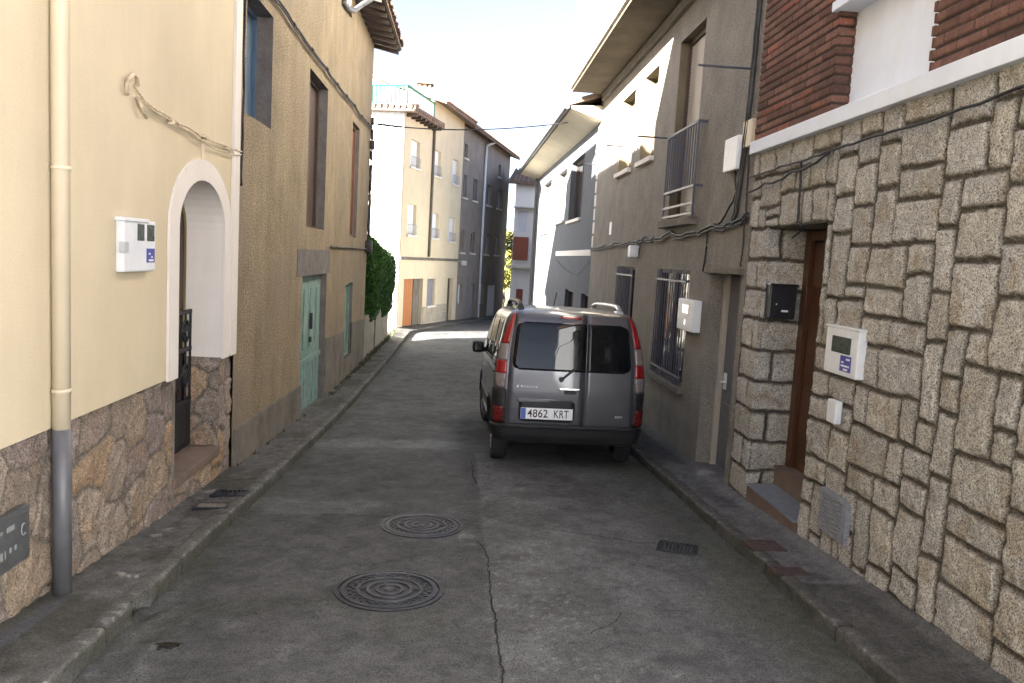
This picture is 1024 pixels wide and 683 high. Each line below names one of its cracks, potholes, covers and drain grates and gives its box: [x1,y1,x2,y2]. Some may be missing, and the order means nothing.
utility cover [192,502,231,511]
manhole cover [381,513,463,539]
utility cover [770,566,811,578]
manhole cover [334,570,444,612]
crack [477,541,505,683]
drain grate [656,539,699,557]
utility cover [741,539,788,552]
